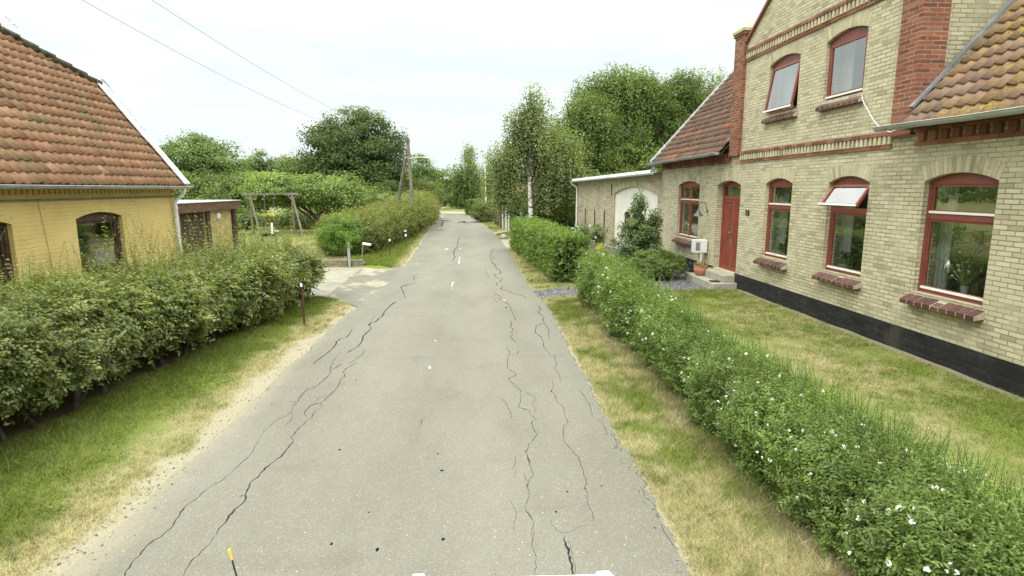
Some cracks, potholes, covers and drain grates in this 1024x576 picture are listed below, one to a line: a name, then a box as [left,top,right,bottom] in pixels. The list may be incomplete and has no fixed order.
crack [124,276,416,576]
crack [486,248,618,575]
